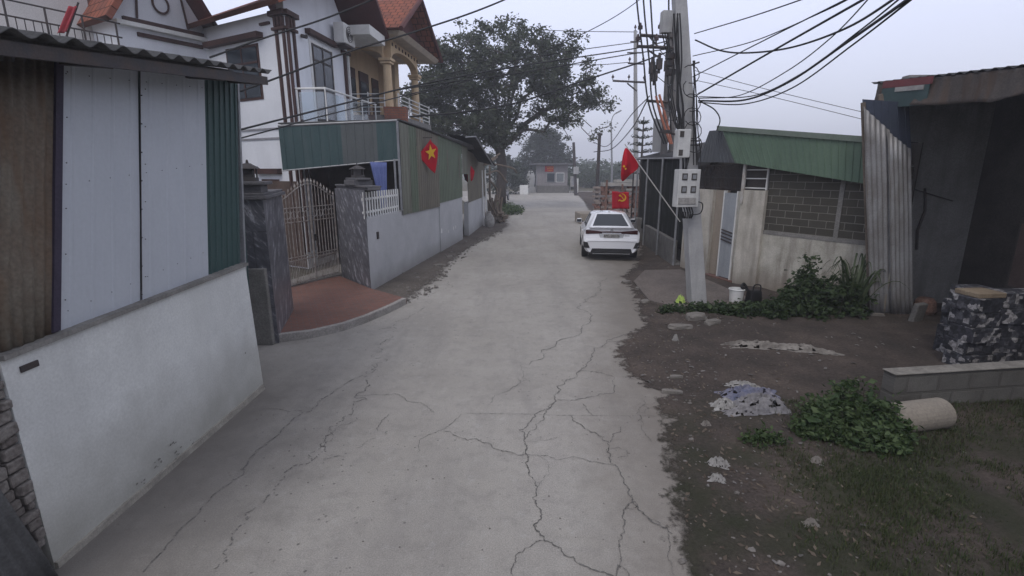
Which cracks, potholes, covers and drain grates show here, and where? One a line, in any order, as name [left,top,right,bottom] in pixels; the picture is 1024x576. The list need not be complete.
crack [492,278,607,402]
crack [214,293,433,569]
crack [418,330,673,576]
